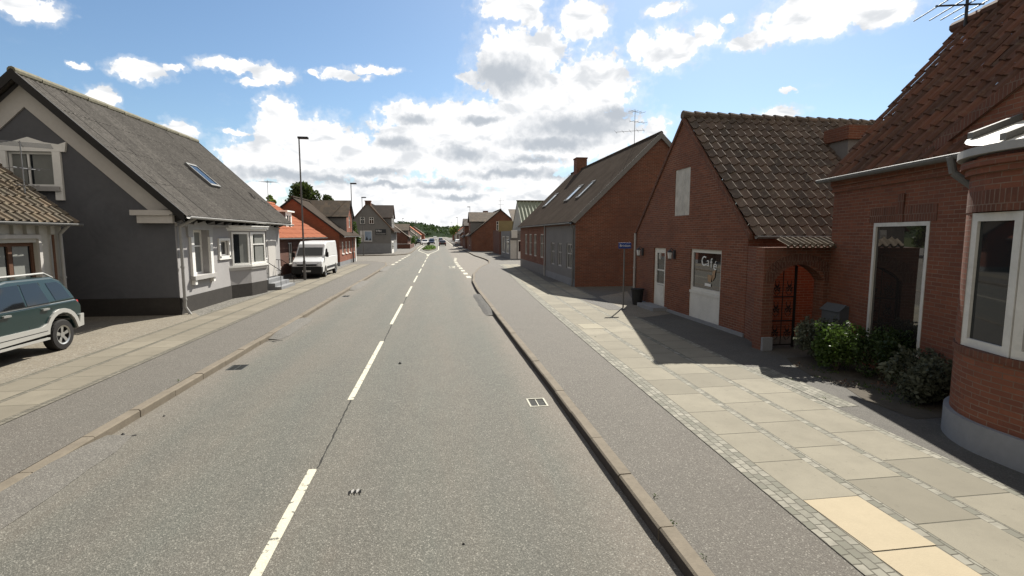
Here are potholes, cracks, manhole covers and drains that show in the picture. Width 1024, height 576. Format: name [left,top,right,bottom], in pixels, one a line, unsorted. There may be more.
drain grate [526,398,549,407]
